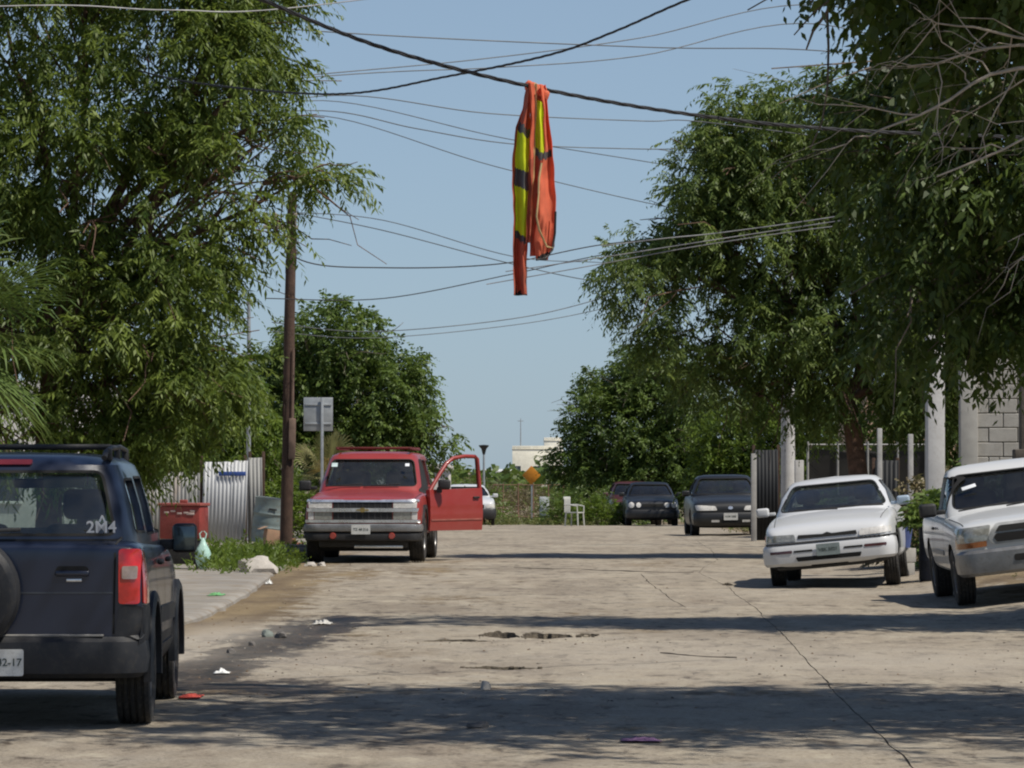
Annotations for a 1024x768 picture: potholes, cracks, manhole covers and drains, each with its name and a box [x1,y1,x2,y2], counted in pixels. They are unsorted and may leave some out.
crack [514,540,913,768]
pothole [479,631,523,639]
pothole [511,632,582,640]
